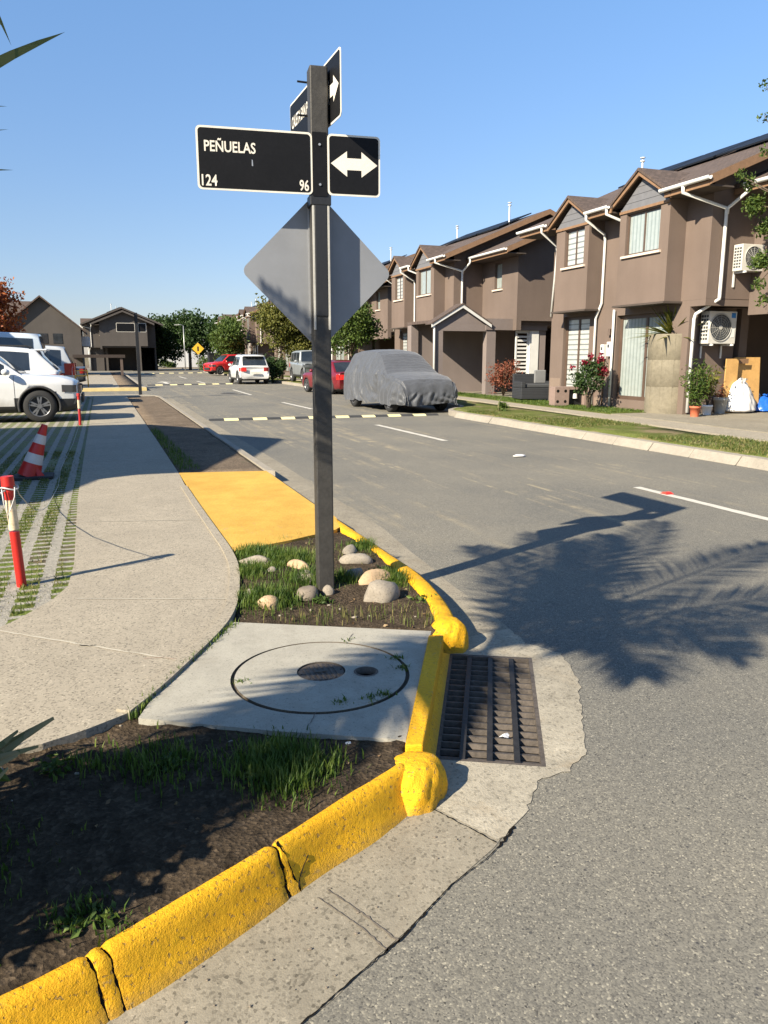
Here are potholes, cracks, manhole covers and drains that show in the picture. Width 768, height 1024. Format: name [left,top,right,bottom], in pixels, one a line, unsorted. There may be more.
manhole cover [230,642,410,714]
drain grate [436,654,546,767]
